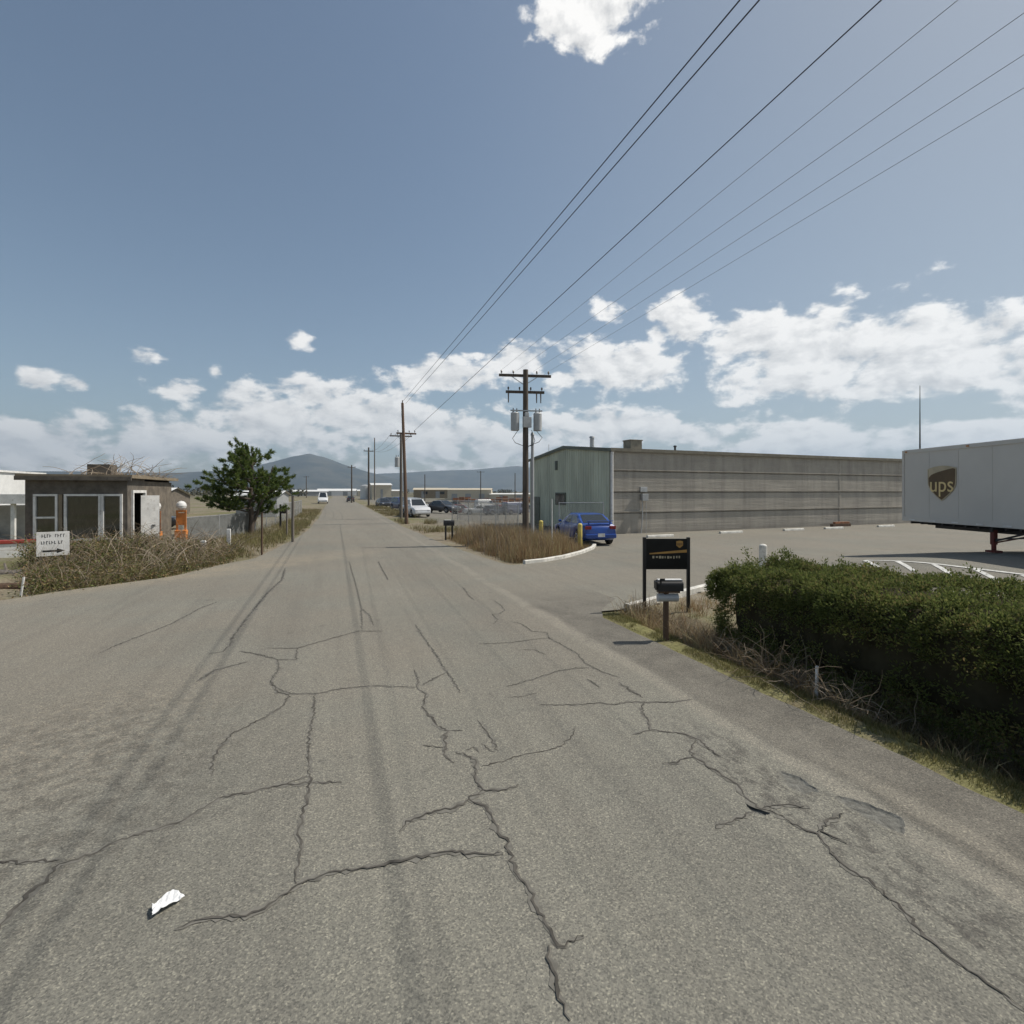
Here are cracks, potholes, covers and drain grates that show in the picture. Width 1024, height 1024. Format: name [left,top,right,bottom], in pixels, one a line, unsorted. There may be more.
crack [0,562,1024,1021]
